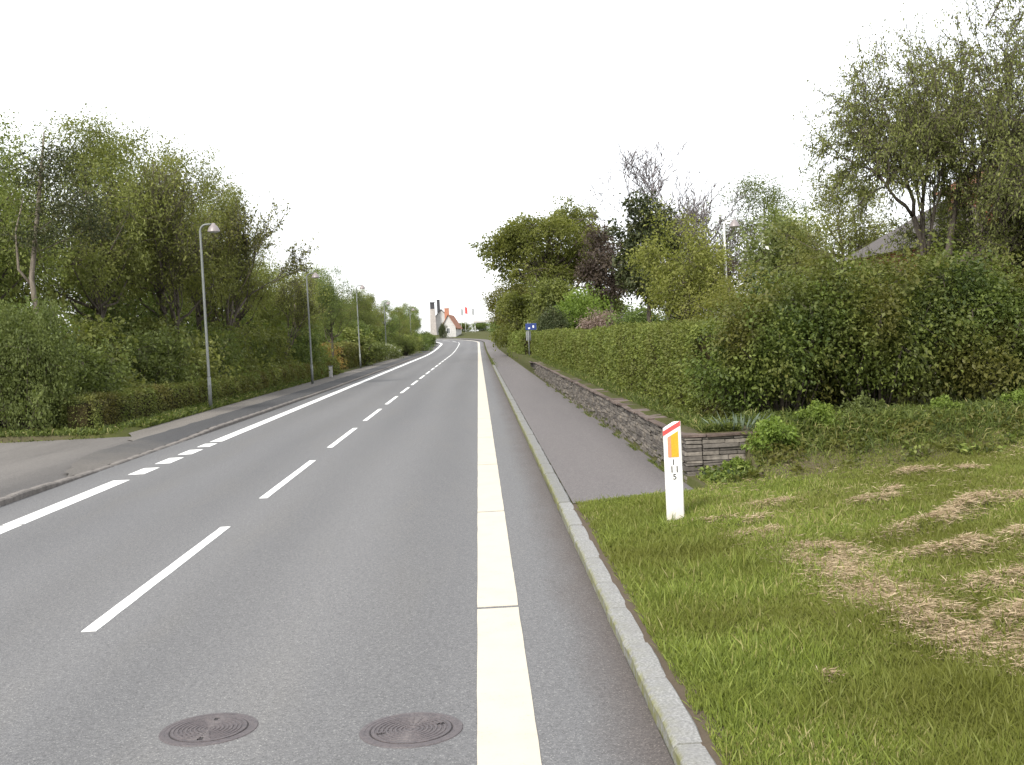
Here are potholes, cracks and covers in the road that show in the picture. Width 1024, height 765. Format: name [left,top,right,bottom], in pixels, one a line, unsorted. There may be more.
manhole cover [359,712,463,748]
manhole cover [158,713,259,747]
